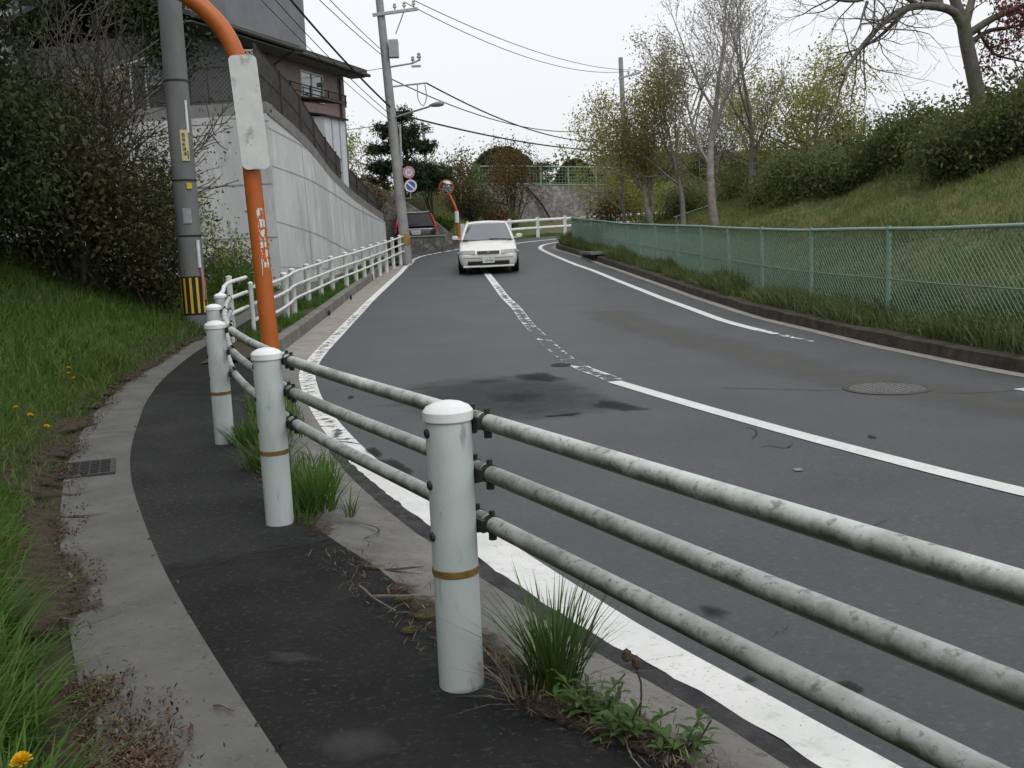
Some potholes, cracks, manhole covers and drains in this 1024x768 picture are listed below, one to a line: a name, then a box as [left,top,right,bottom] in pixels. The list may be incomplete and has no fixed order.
drain grate [53,458,116,481]
manhole cover [842,382,933,395]
